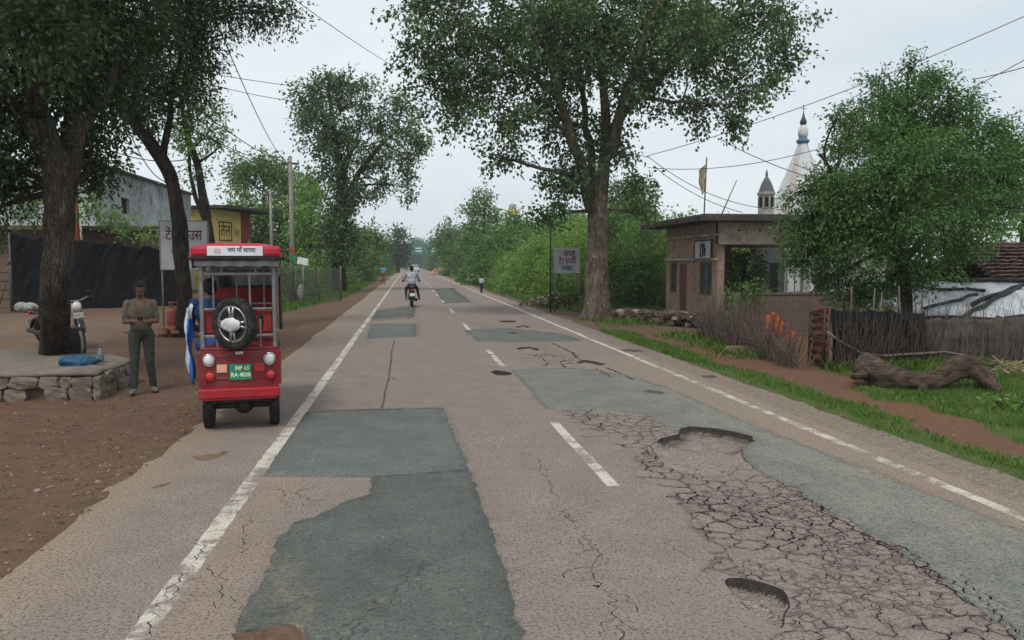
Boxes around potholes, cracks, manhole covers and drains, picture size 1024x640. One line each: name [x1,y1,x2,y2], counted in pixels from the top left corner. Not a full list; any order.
crack [595,413,1020,640]
crack [381,340,396,408]
pothole [725,578,790,628]
pothole [650,426,755,478]
crack [528,457,657,640]
pothole [577,360,608,368]
crack [526,343,632,379]
